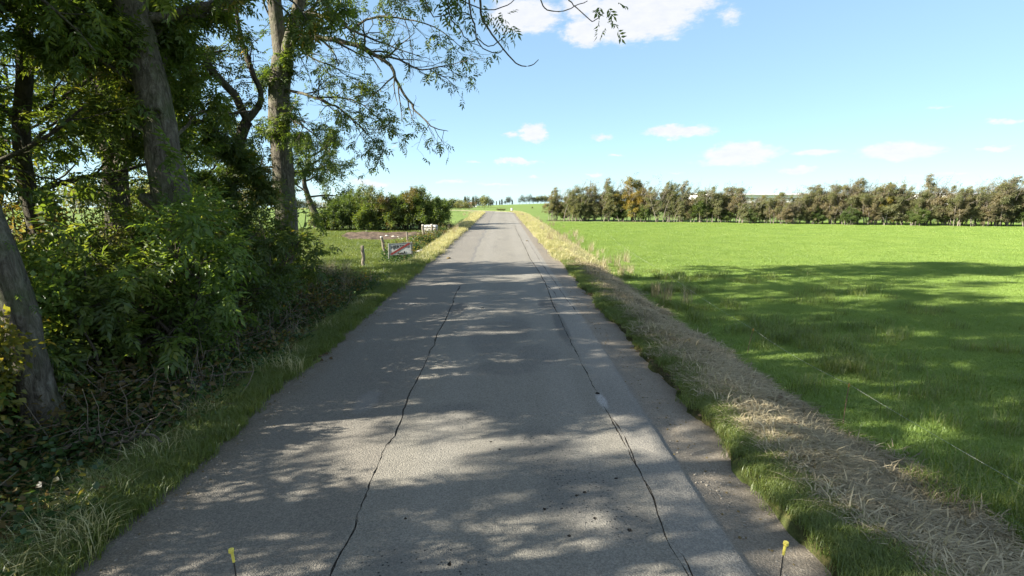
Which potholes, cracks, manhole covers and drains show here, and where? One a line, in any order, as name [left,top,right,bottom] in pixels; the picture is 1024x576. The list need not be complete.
crack [516,230,693,576]
crack [330,286,460,576]
